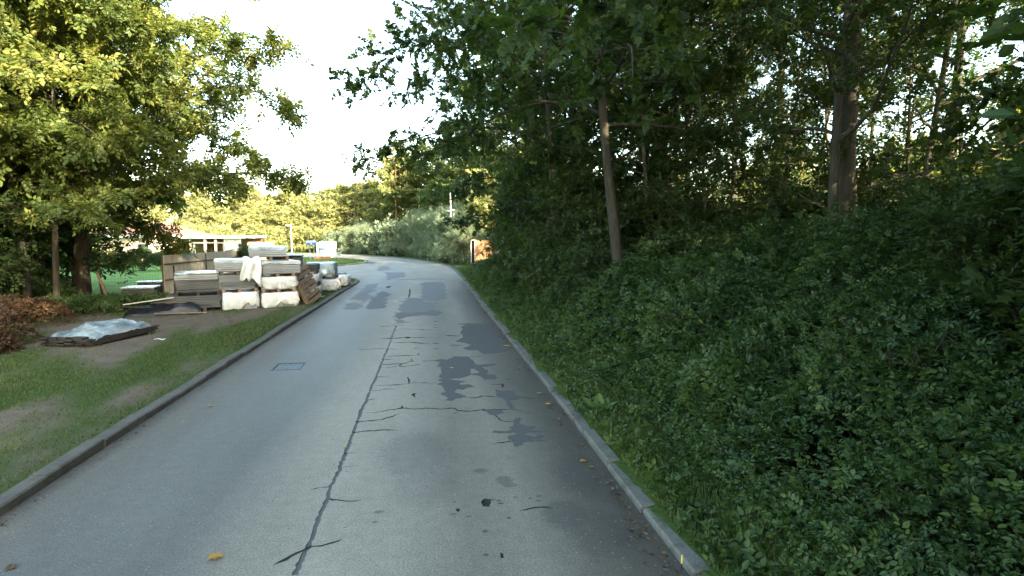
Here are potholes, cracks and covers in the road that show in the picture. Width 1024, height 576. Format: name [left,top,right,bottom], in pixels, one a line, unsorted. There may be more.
crack [274,321,535,575]
